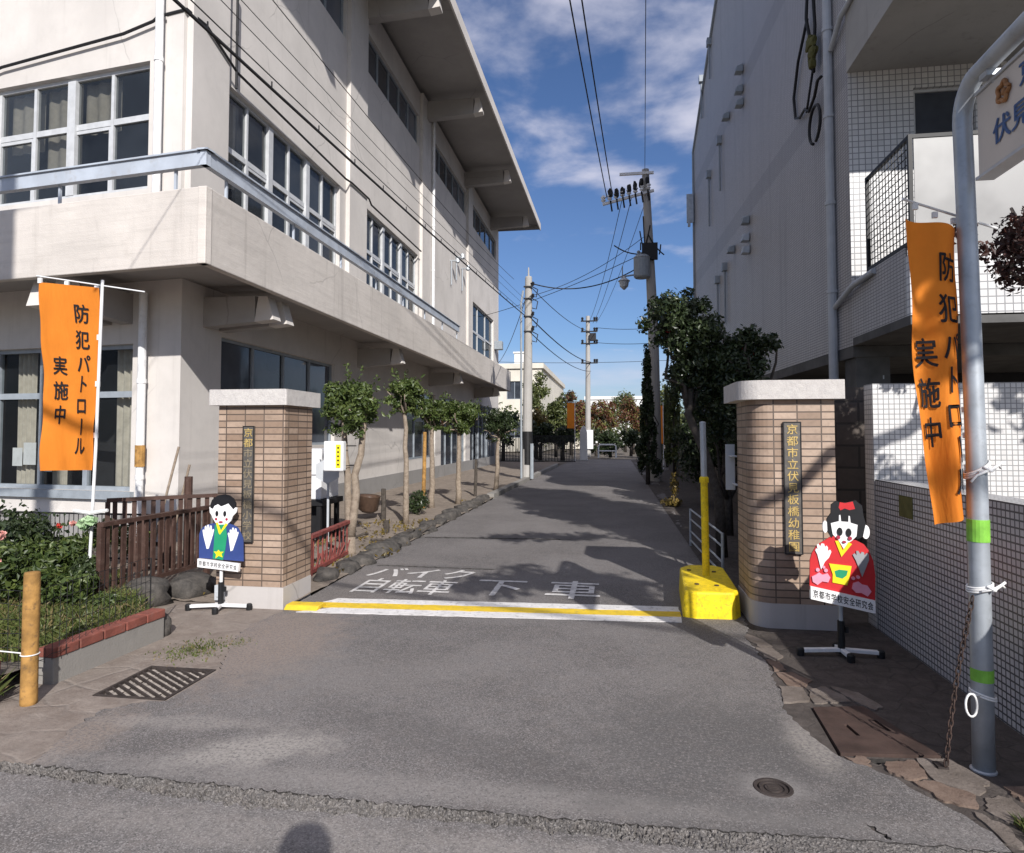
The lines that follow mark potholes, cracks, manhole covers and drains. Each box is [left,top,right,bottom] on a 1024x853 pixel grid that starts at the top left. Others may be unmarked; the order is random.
manhole cover [753,778,794,798]
drain grate [92,666,216,701]
